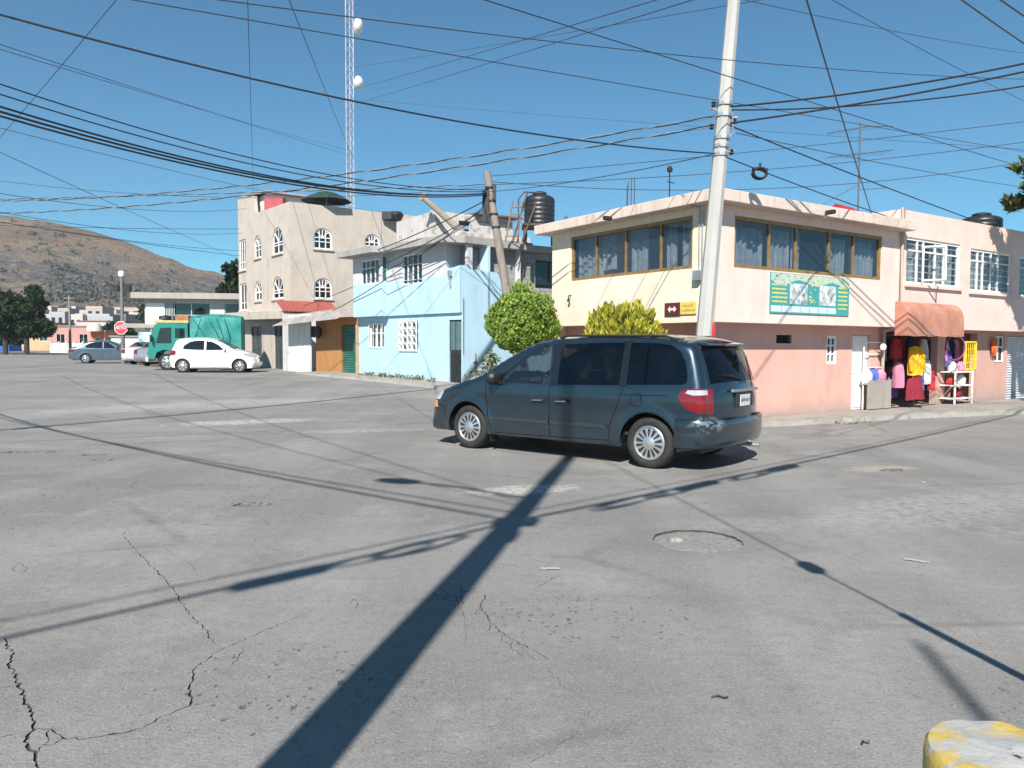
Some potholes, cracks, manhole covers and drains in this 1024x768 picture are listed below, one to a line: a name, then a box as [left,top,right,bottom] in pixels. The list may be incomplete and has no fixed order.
crack [1,481,297,768]
manhole cover [653,530,744,553]
crack [431,584,546,659]
